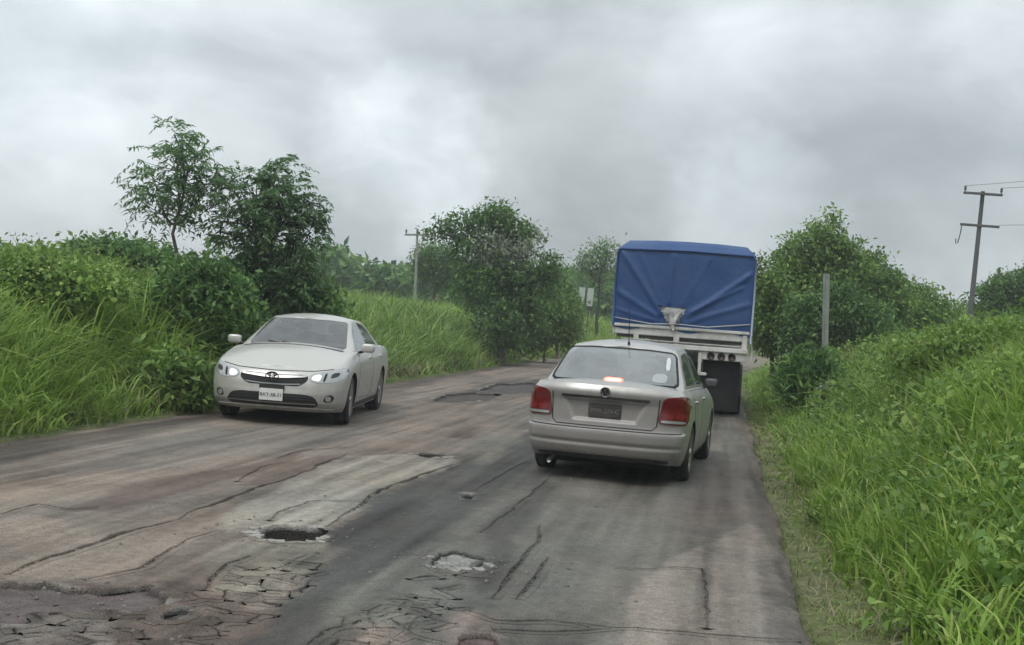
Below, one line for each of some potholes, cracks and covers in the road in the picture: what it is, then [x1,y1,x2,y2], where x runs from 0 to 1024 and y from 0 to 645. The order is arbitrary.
pothole [423,391,510,404]
crack [0,446,802,645]
pothole [240,523,339,544]
pothole [452,491,484,501]
pothole [468,382,537,395]
pothole [420,548,499,573]
